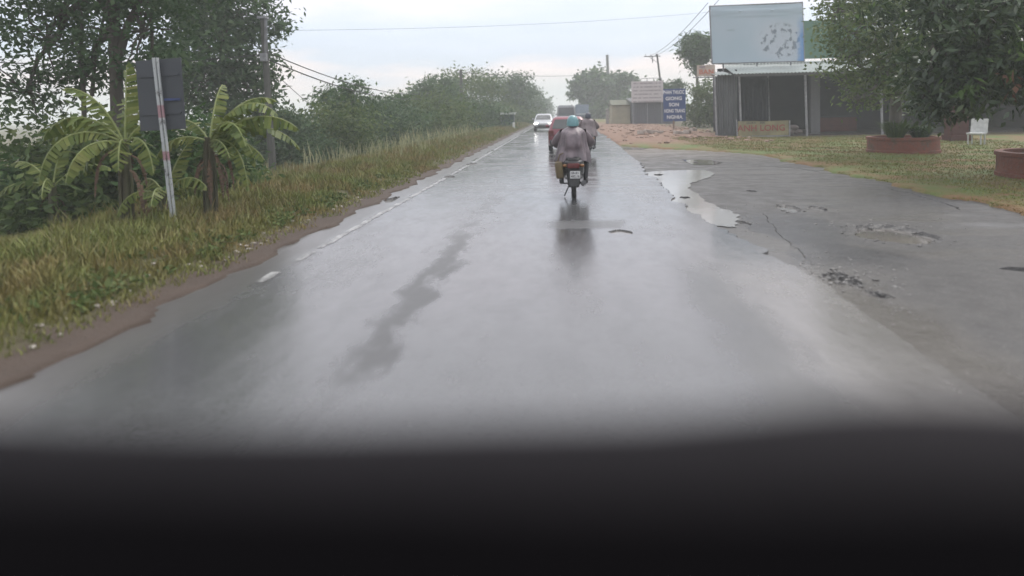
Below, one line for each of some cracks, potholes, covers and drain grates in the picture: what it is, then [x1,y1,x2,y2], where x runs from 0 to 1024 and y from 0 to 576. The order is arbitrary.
pothole [840,222,956,247]
pothole [775,204,805,213]
crack [763,214,812,263]
pothole [818,270,866,287]
pothole [865,289,896,299]
